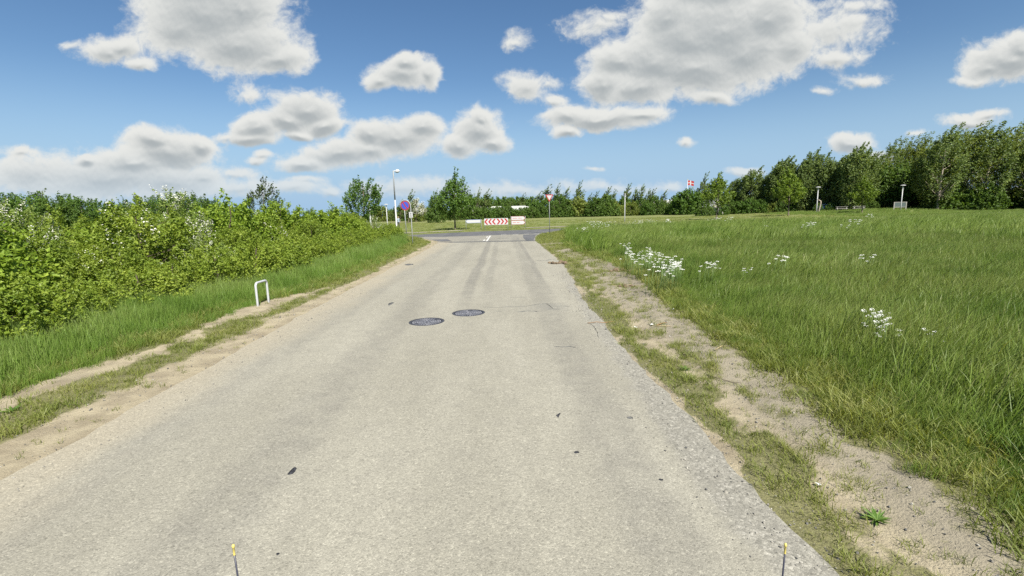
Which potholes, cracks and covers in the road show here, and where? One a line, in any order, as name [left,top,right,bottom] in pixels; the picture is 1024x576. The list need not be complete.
manhole cover [409,318,444,326]
